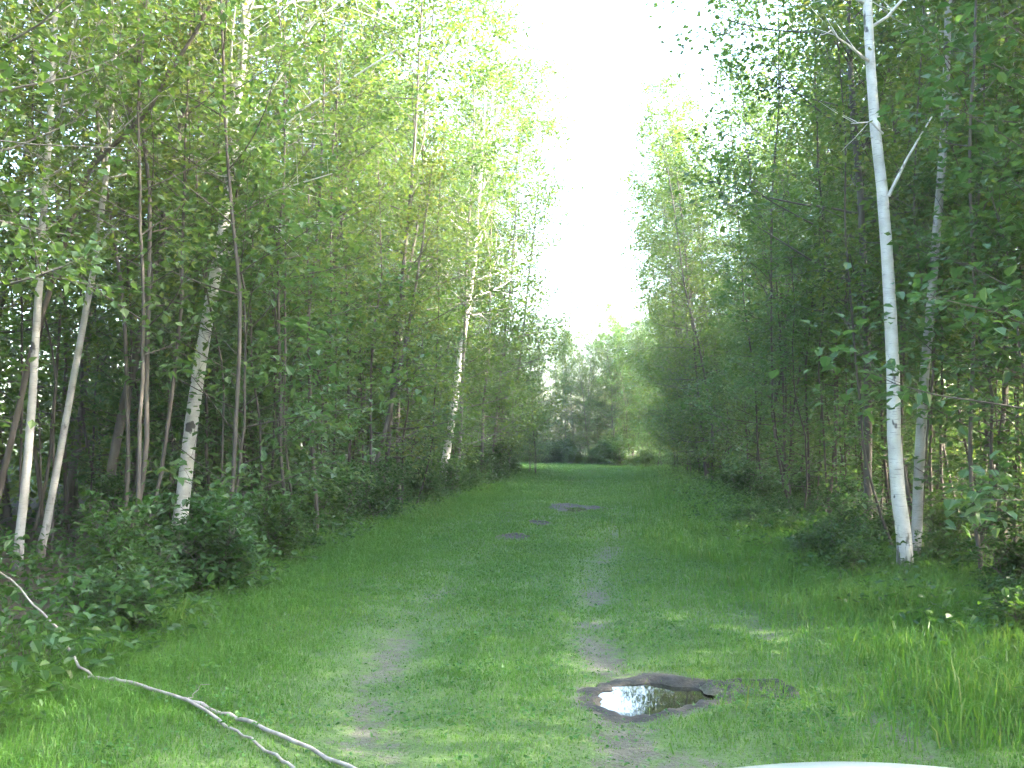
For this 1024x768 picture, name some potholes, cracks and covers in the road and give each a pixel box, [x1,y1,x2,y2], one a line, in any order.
pothole [495,532,530,541]
pothole [577,673,763,723]
pothole [542,503,613,513]
